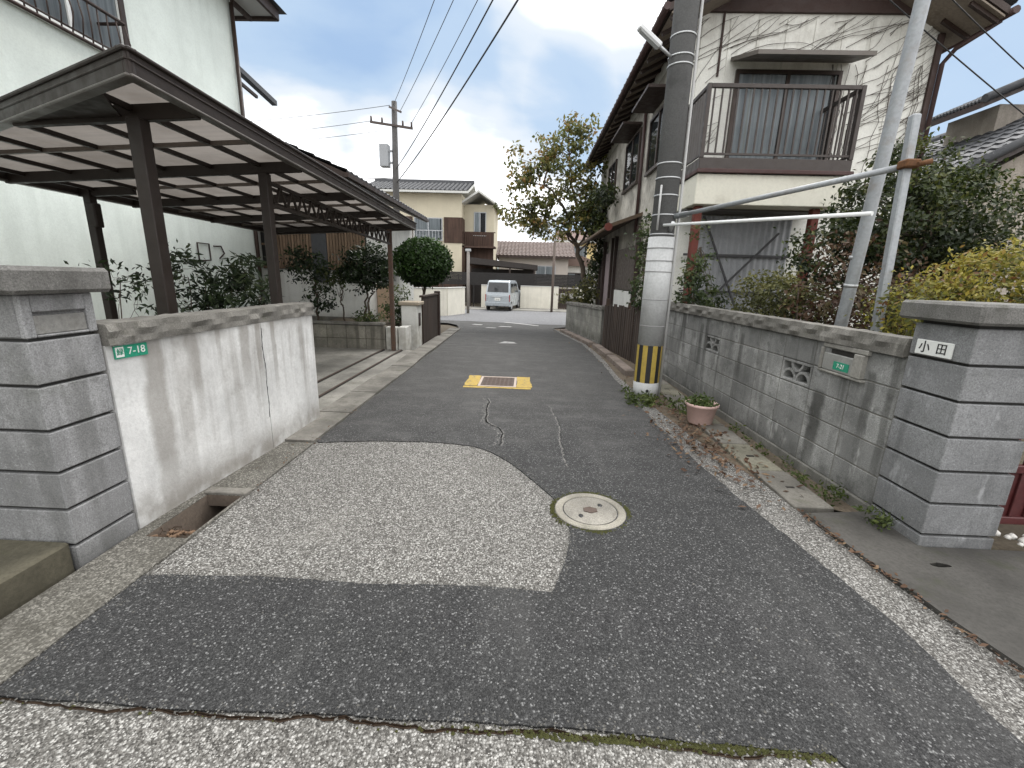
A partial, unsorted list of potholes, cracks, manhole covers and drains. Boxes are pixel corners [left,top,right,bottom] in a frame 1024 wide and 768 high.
crack [549,406,569,467]
crack [481,398,505,446]
manhole cover [549,491,632,535]
